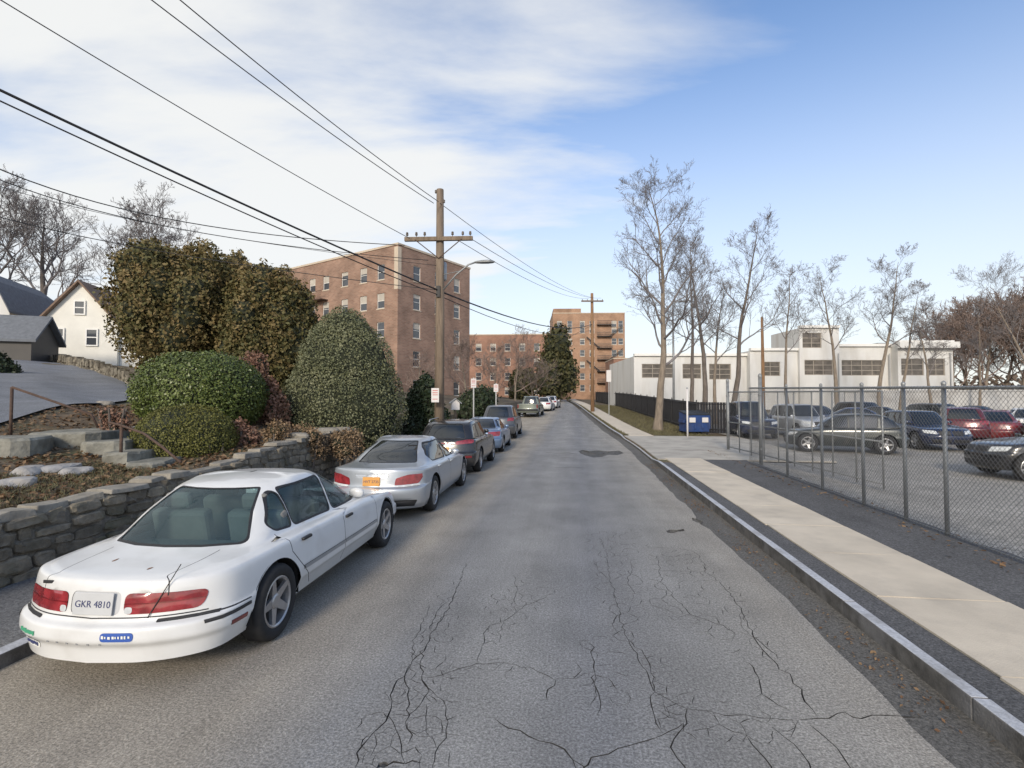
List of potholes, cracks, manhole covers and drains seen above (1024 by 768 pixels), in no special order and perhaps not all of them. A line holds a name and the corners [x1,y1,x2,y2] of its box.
crack [355,532,915,768]
